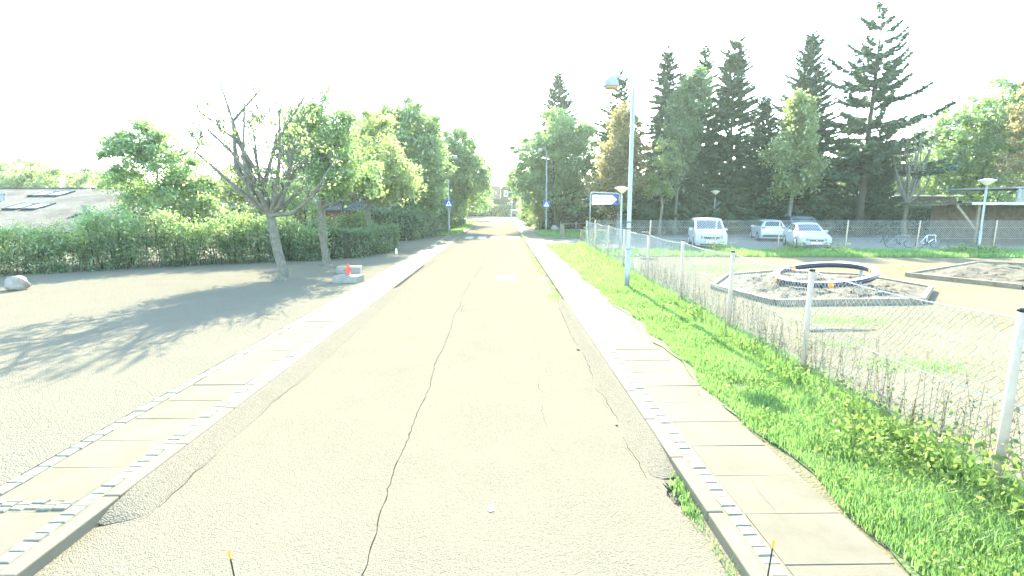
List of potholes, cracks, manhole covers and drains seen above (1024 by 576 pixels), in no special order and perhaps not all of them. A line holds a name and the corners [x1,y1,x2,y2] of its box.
crack [361,262,528,576]
crack [560,310,646,477]
